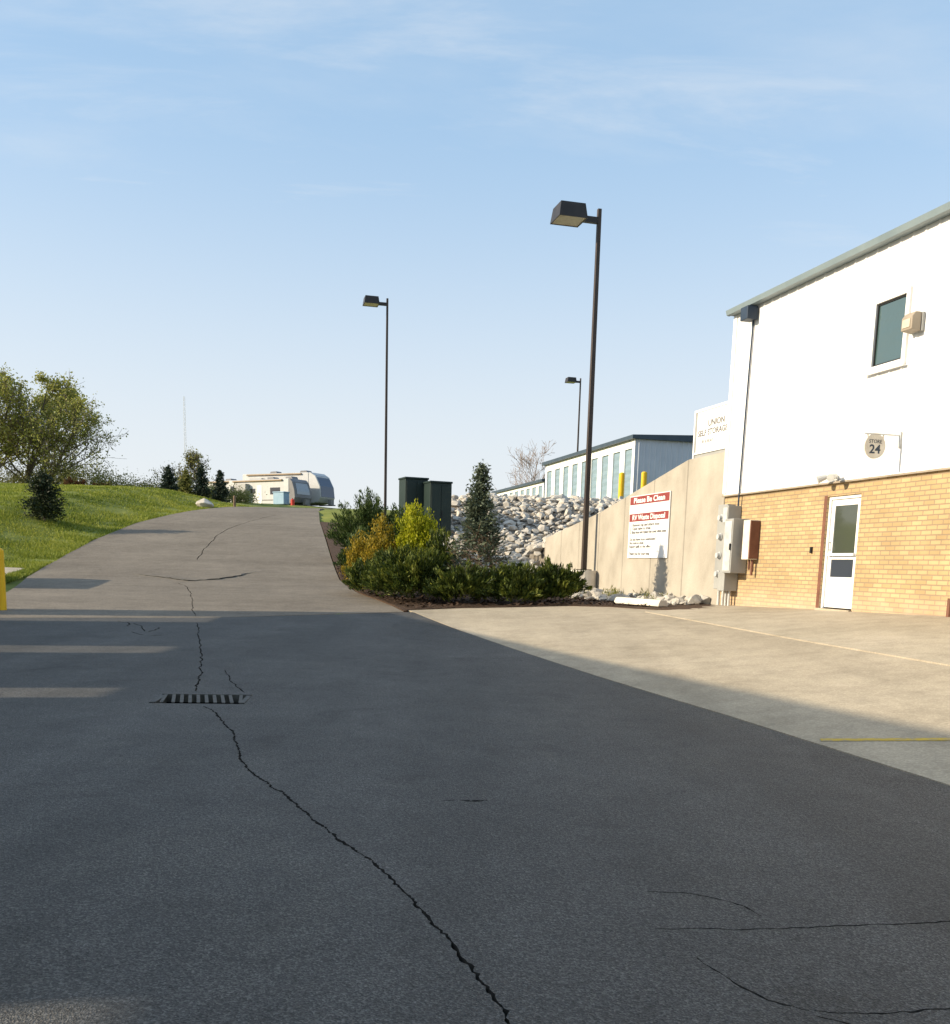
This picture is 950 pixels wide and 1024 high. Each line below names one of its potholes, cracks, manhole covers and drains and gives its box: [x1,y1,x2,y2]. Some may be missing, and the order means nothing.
crack [647,891,950,930]
drain grate [149,693,252,704]
crack [697,958,950,1024]
crack [133,570,510,1024]
